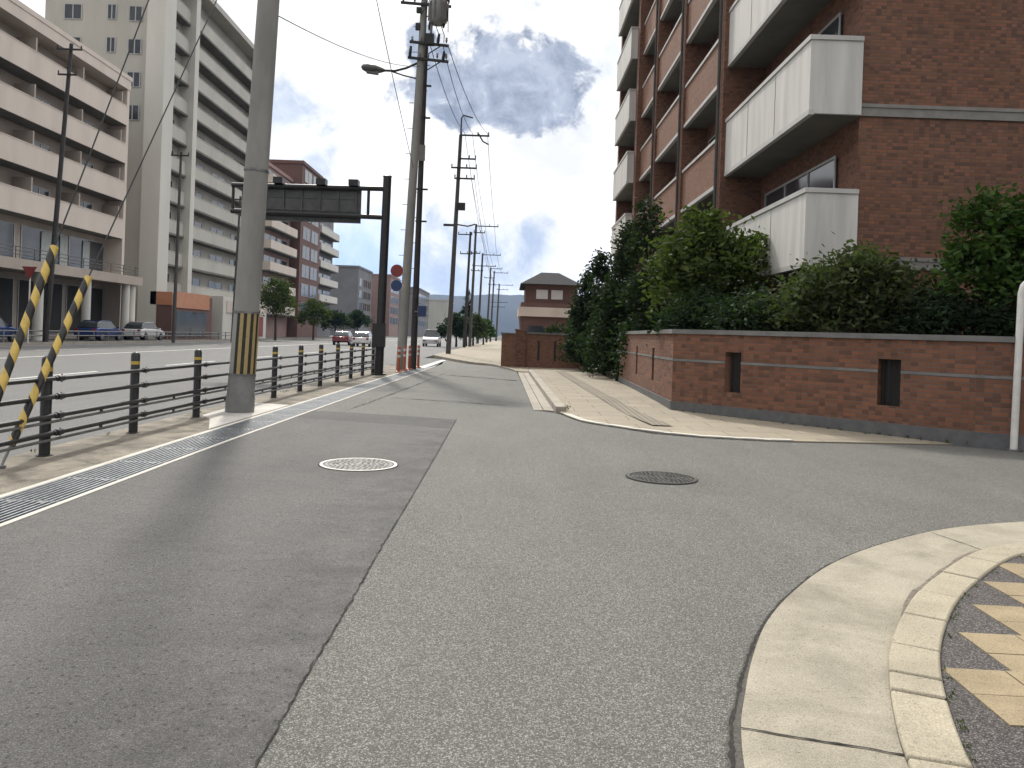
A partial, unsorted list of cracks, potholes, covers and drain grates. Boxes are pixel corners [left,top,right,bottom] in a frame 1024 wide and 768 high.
manhole cover [318,458,399,472]
manhole cover [625,471,698,485]
